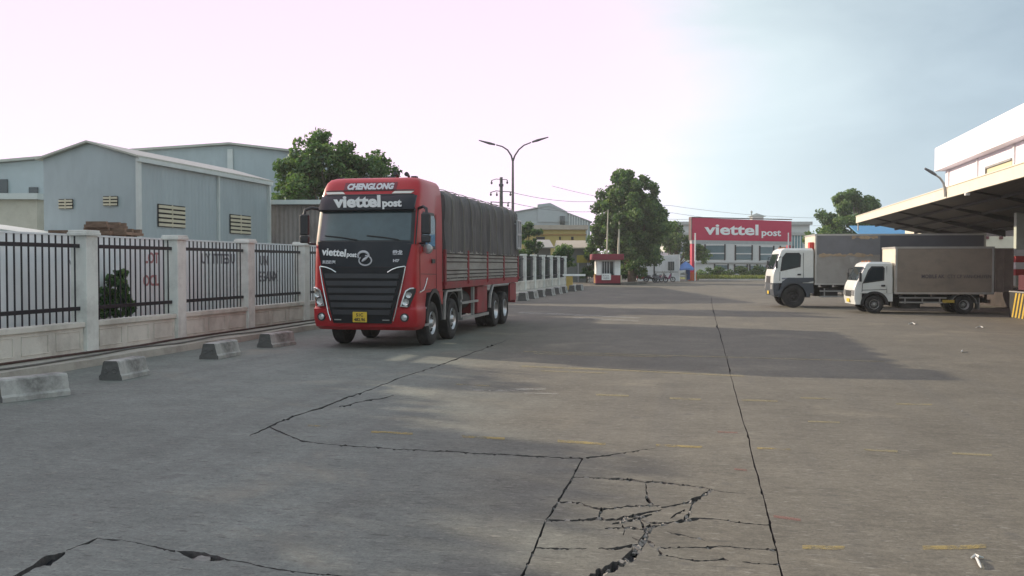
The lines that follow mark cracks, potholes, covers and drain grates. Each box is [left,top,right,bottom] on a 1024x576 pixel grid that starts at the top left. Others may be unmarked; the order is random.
crack [249,340,780,576]
crack [66,538,340,576]
